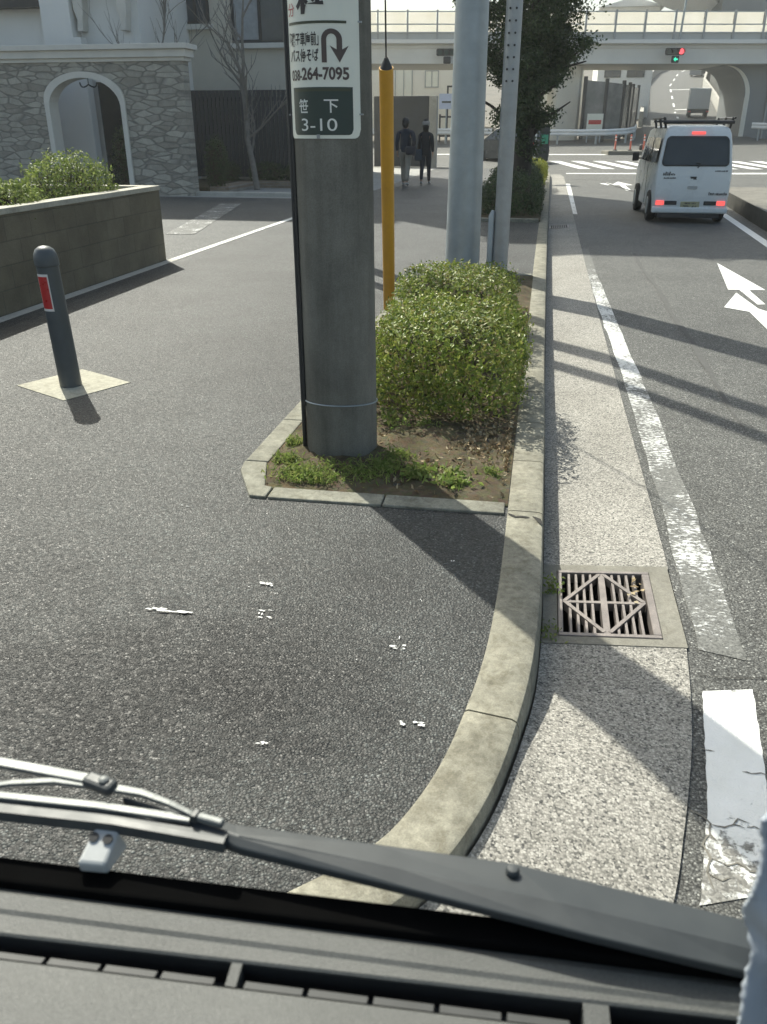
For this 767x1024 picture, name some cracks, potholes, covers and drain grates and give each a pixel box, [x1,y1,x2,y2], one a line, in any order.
crack [691,810,759,889]
drain grate [540,564,688,650]
